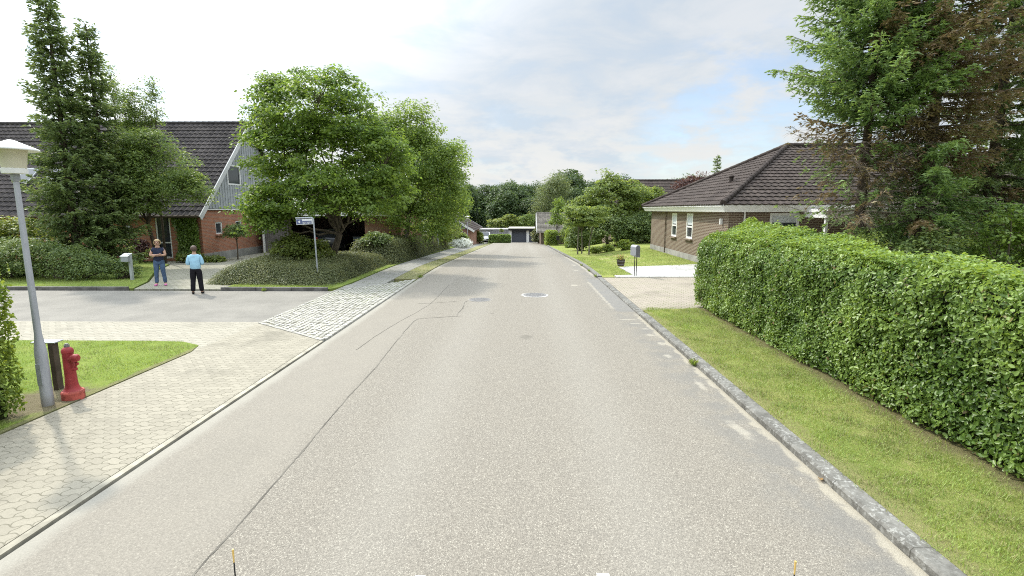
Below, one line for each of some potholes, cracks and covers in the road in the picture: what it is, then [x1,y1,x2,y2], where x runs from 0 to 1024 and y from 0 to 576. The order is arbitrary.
crack [191,285,465,576]
